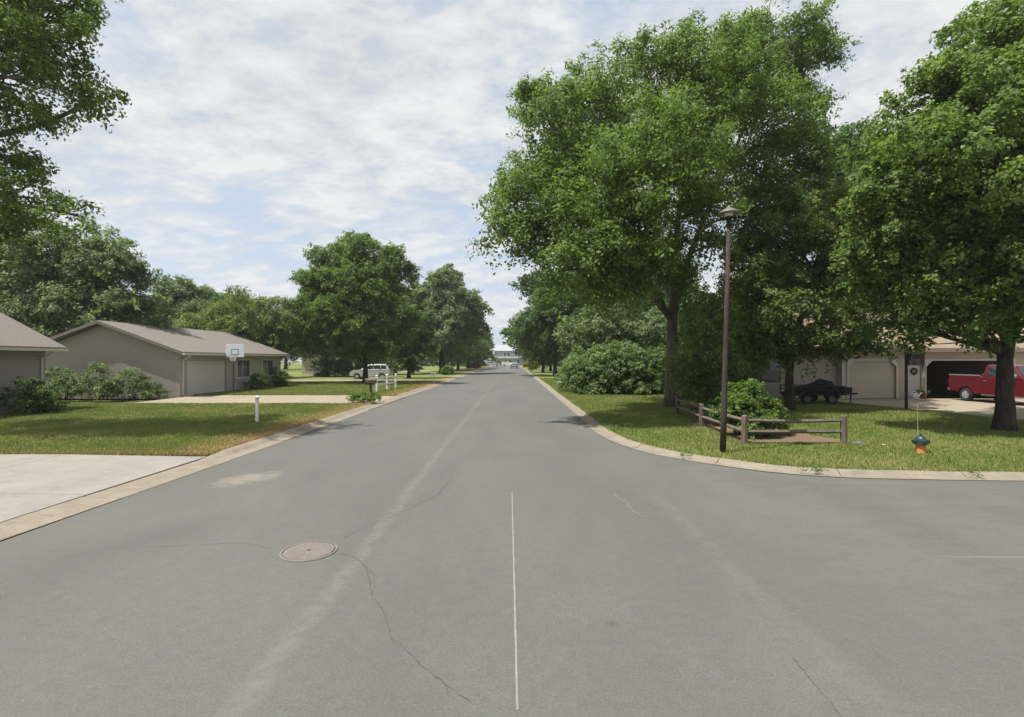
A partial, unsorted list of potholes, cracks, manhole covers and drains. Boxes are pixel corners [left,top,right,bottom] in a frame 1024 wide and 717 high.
manhole cover [279,541,338,562]
crack [342,478,472,703]
